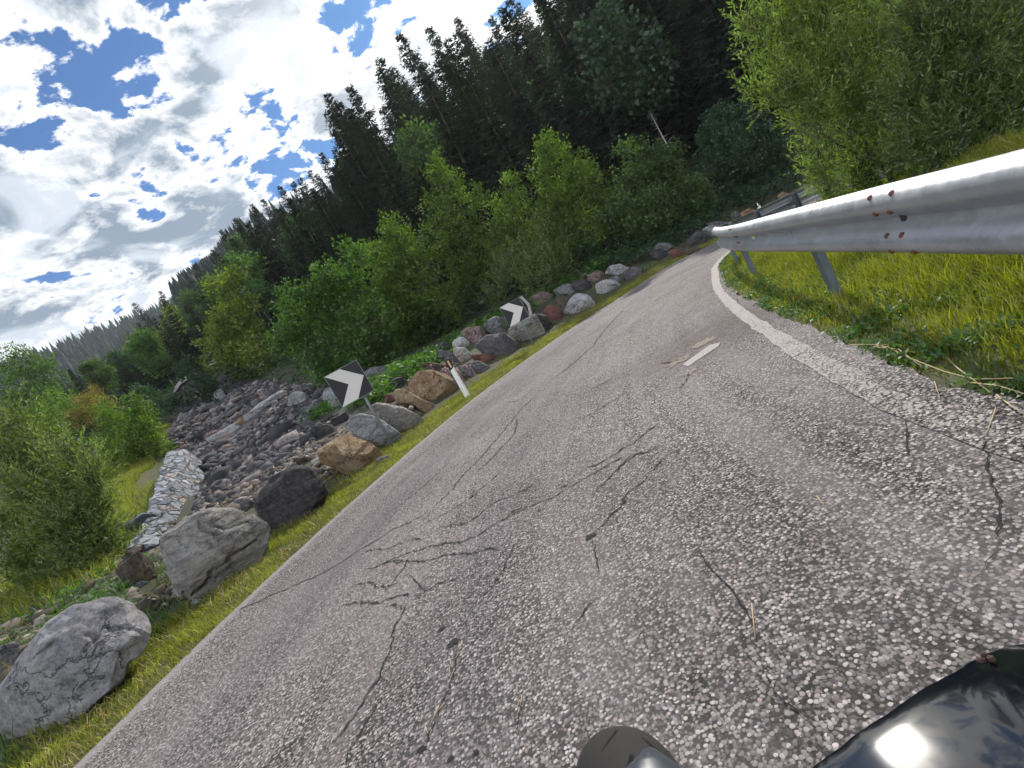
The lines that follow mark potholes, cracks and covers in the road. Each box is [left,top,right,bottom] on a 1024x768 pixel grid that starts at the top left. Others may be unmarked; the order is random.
crack [699,549,756,634]
crack [981,439,1002,572]
crack [241,387,669,768]
